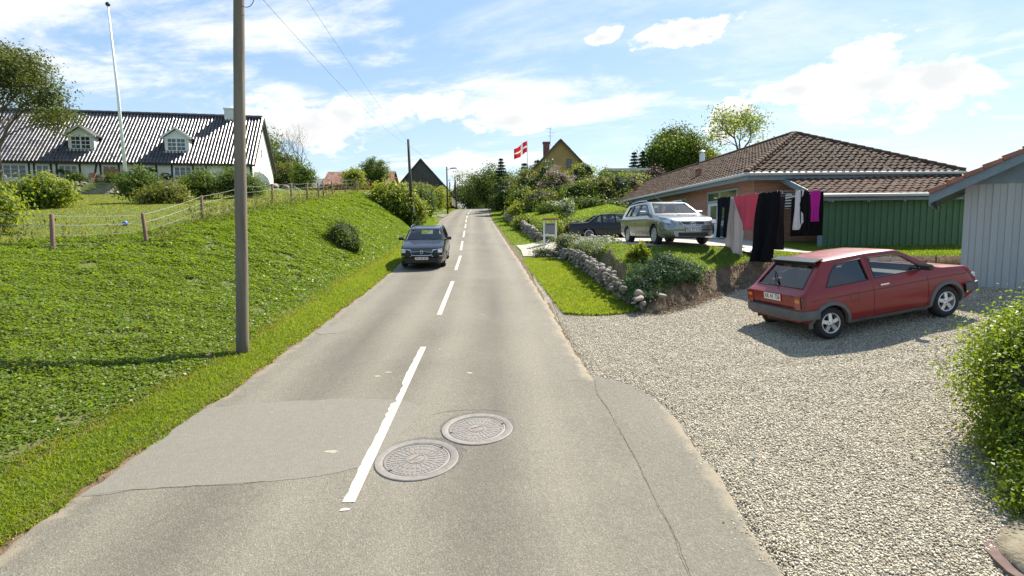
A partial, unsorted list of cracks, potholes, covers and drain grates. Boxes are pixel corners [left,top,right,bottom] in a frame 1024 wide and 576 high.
manhole cover [374,439,459,482]
crack [571,379,690,574]
manhole cover [441,413,513,446]
